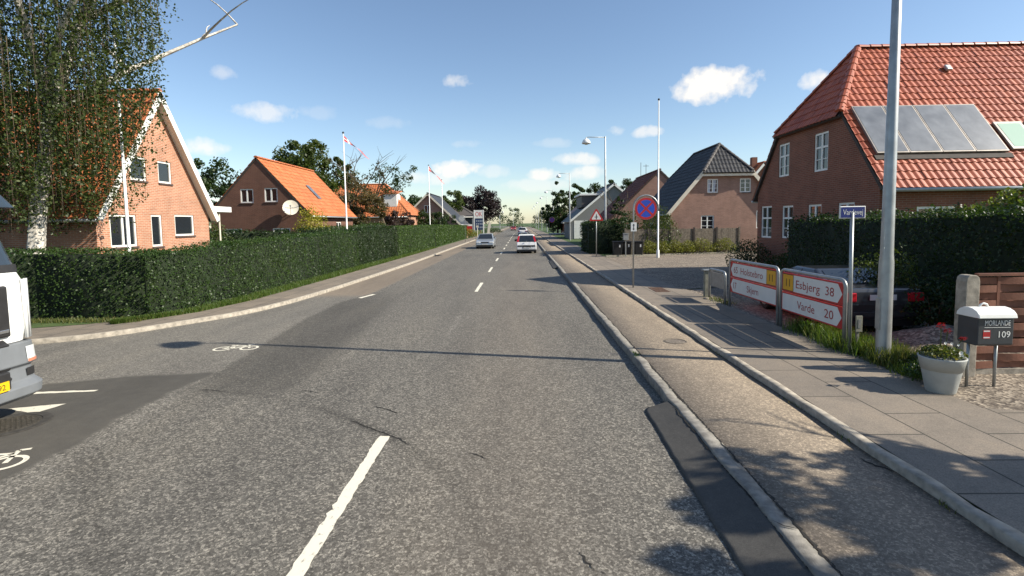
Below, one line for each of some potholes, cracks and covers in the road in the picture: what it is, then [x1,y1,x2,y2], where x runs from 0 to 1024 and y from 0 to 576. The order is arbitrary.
manhole cover [0,412,54,436]
crack [351,407,408,444]
